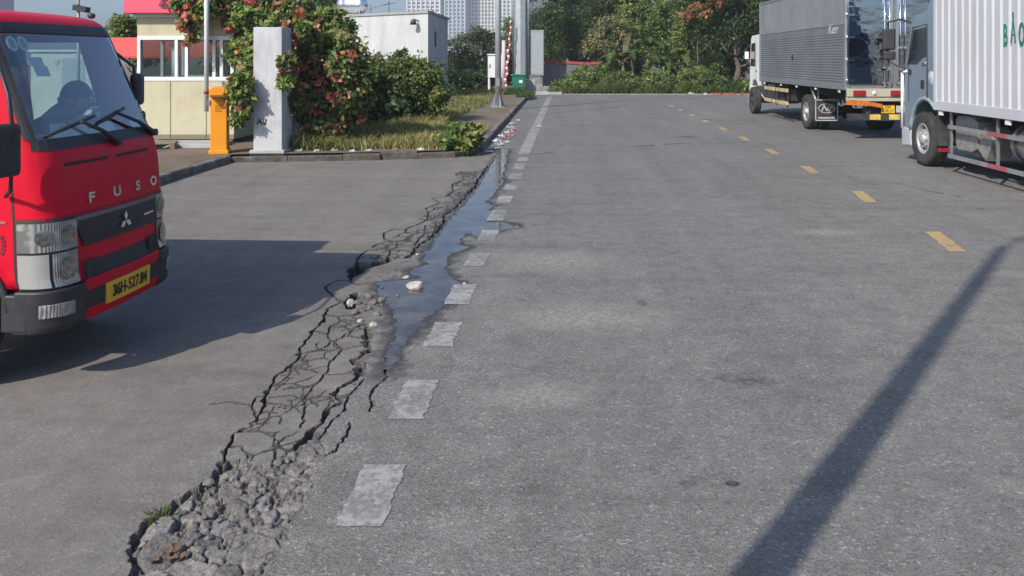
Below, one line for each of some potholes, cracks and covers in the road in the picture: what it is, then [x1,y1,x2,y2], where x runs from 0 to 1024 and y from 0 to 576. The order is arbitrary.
pothole [346,256,394,281]
crack [208,166,489,470]
pothole [126,439,335,576]
